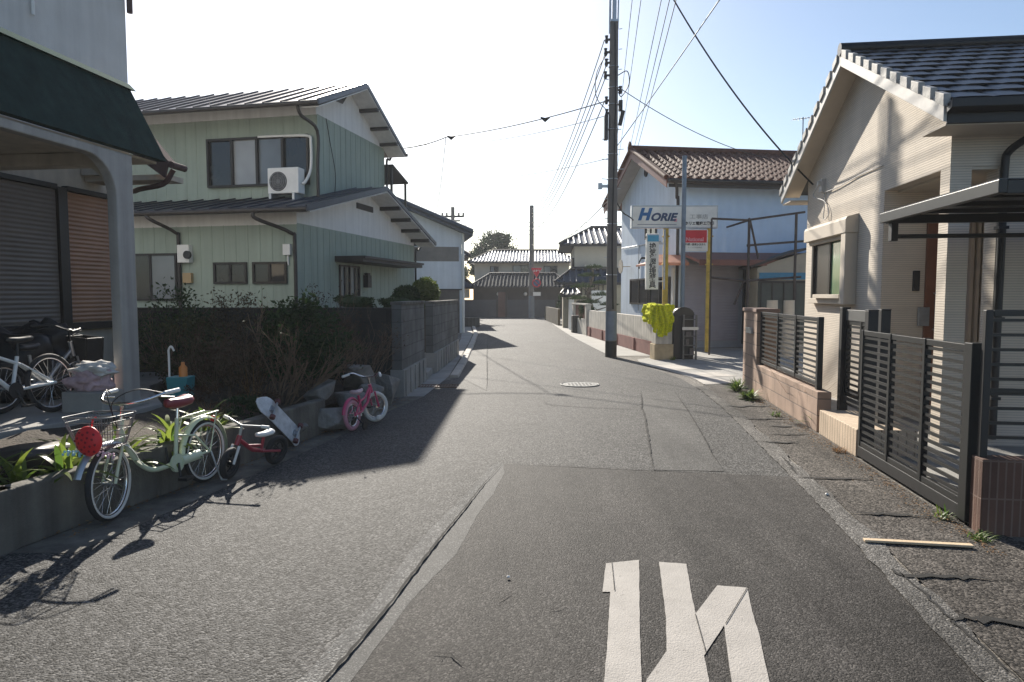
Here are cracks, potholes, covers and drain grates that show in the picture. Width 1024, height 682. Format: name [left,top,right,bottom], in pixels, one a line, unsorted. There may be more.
crack [899,571,1022,682]
